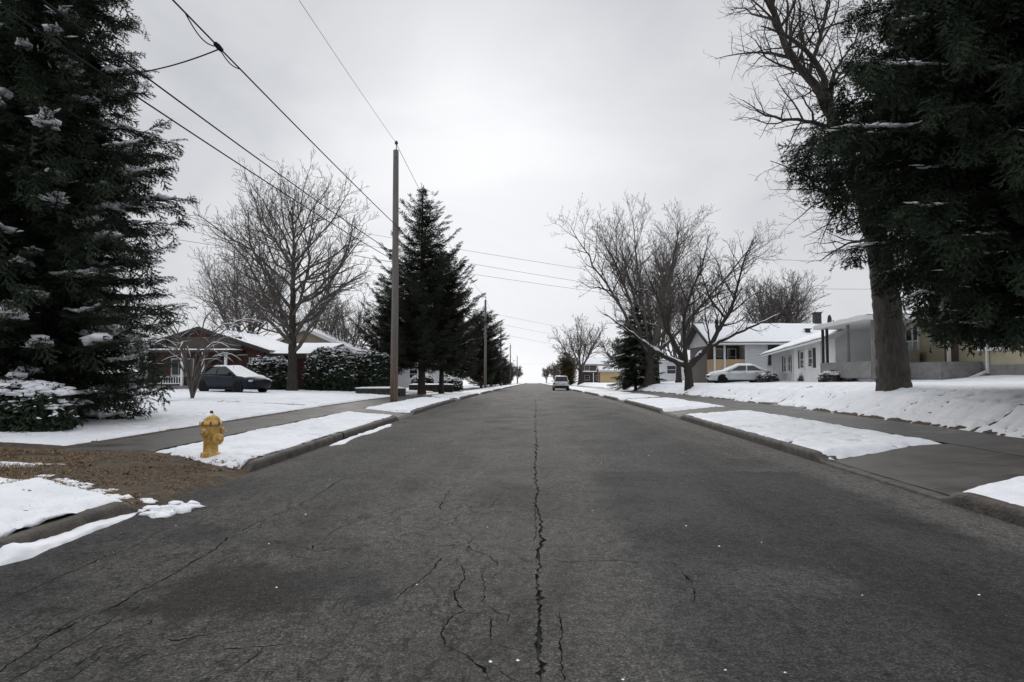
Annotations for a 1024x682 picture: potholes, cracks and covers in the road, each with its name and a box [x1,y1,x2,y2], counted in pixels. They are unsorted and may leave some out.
crack [395,403,696,681]
crack [0,479,399,680]
